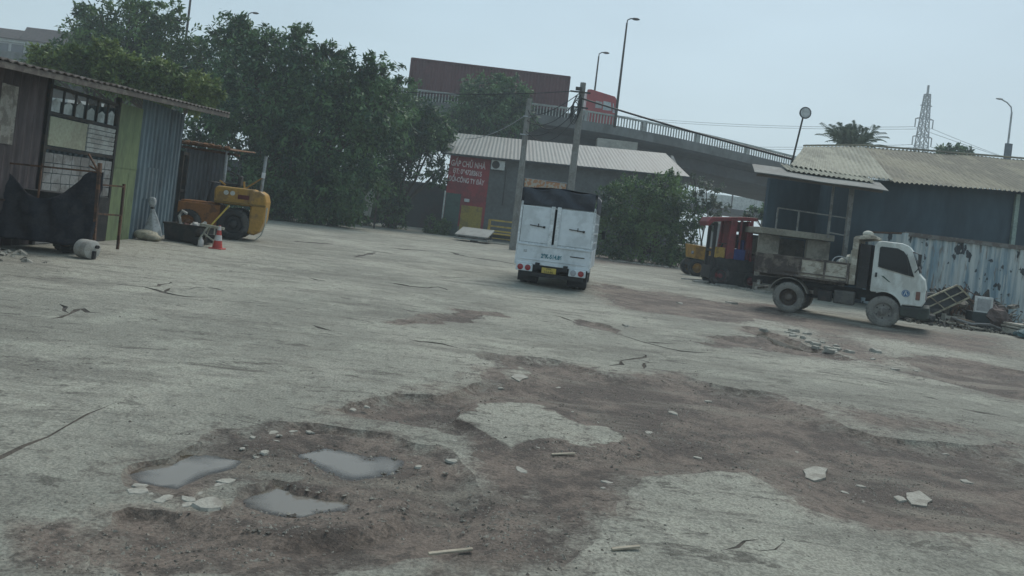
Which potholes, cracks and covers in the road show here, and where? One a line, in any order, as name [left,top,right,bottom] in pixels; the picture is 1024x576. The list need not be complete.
crack [354,247,426,258]
crack [51,304,99,319]
crack [724,539,782,551]
pothole [78,421,503,576]
crack [112,282,224,297]
pothole [697,326,854,361]
crack [0,405,110,460]
crack [610,335,707,369]
pothole [387,308,510,325]
